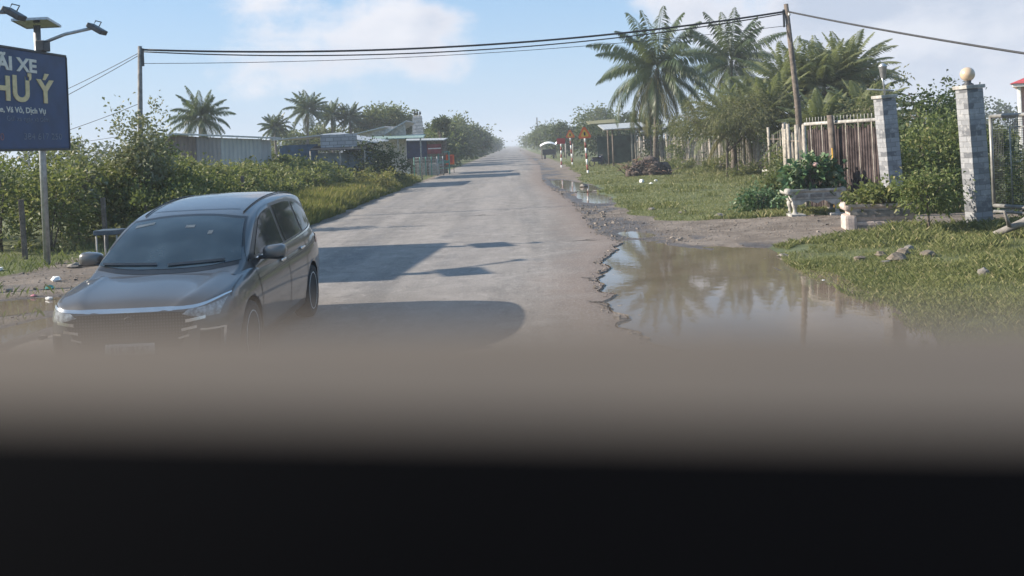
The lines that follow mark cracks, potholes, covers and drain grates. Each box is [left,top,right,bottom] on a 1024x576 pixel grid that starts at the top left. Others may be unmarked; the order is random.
pothole [597,236,904,316]
